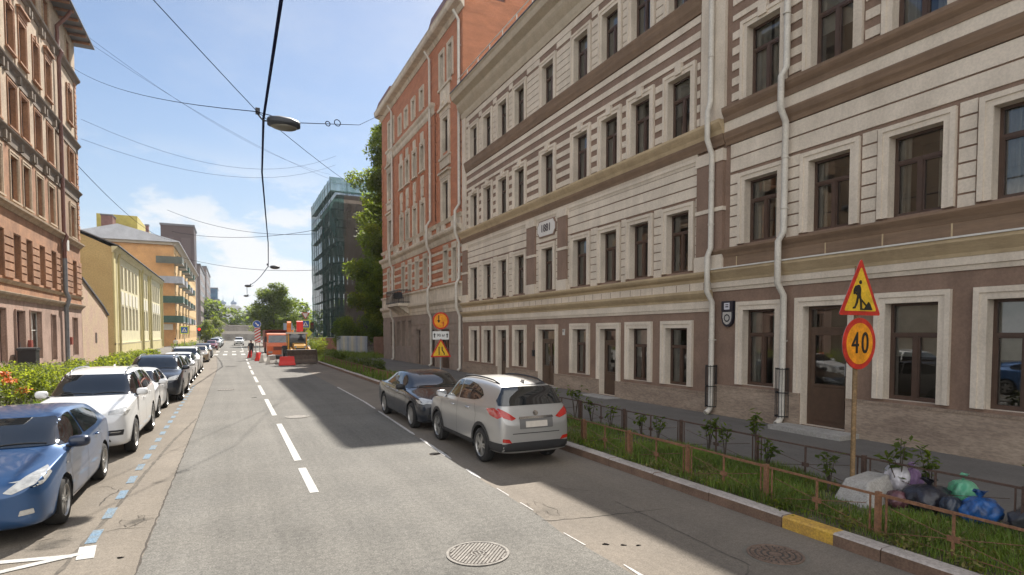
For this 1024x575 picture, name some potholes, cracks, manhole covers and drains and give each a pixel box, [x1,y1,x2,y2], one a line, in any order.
crack [99,486,154,532]
manhole cover [742,543,811,567]
crack [526,476,666,521]
manhole cover [446,541,509,566]
